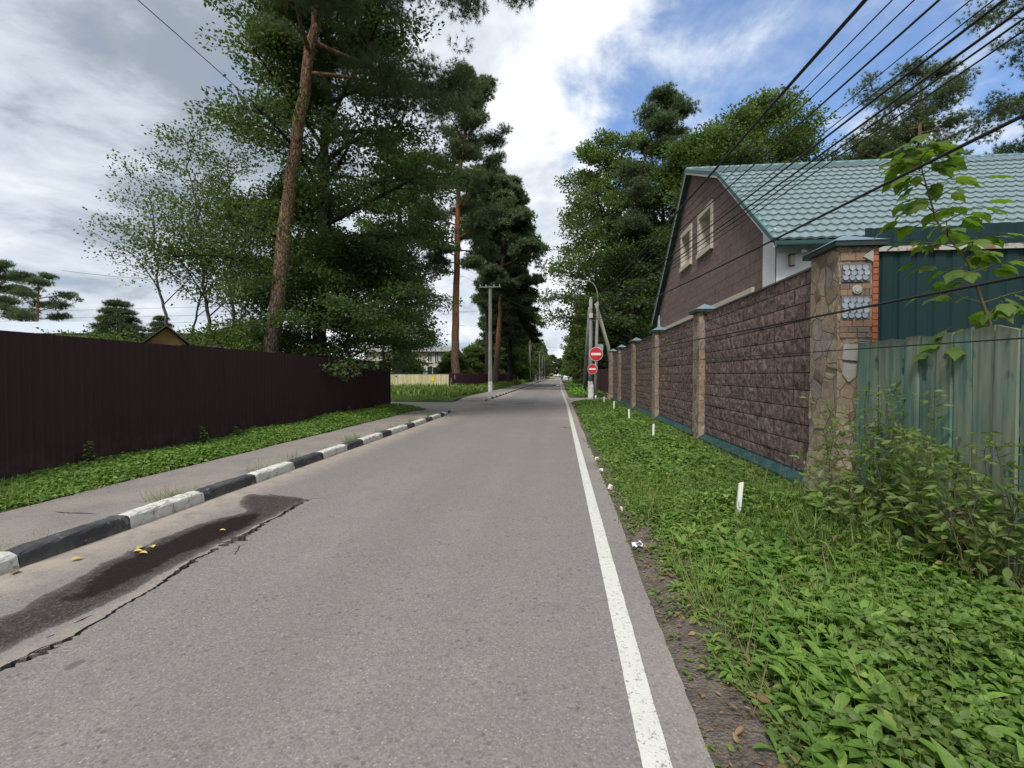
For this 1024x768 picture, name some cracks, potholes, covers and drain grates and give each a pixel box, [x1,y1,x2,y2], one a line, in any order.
crack [0,494,316,672]
